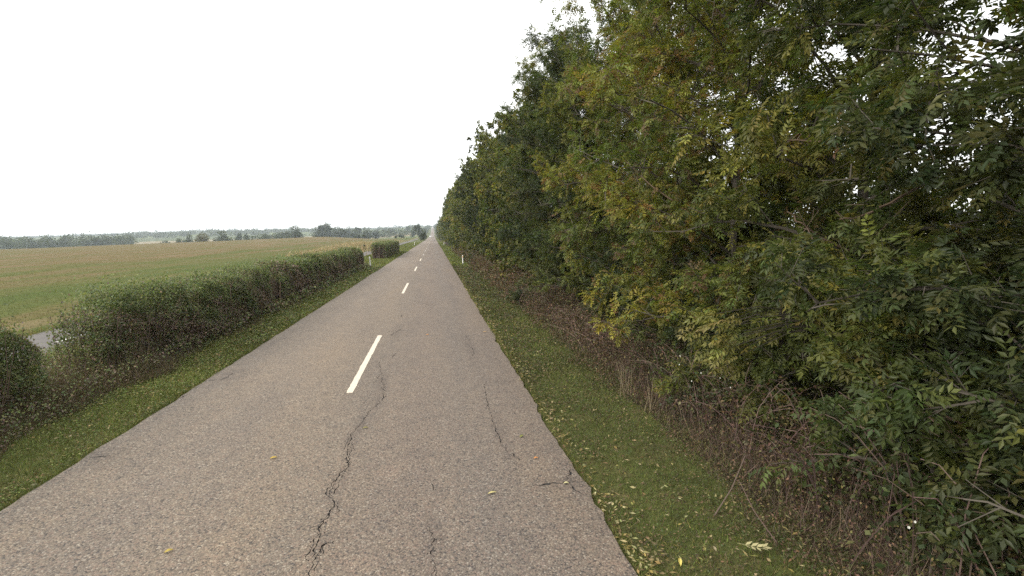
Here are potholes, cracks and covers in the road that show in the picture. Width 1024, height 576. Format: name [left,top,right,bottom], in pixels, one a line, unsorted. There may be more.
crack [427,483,441,575]
crack [484,381,520,461]
crack [525,470,582,494]
crack [305,363,387,576]
